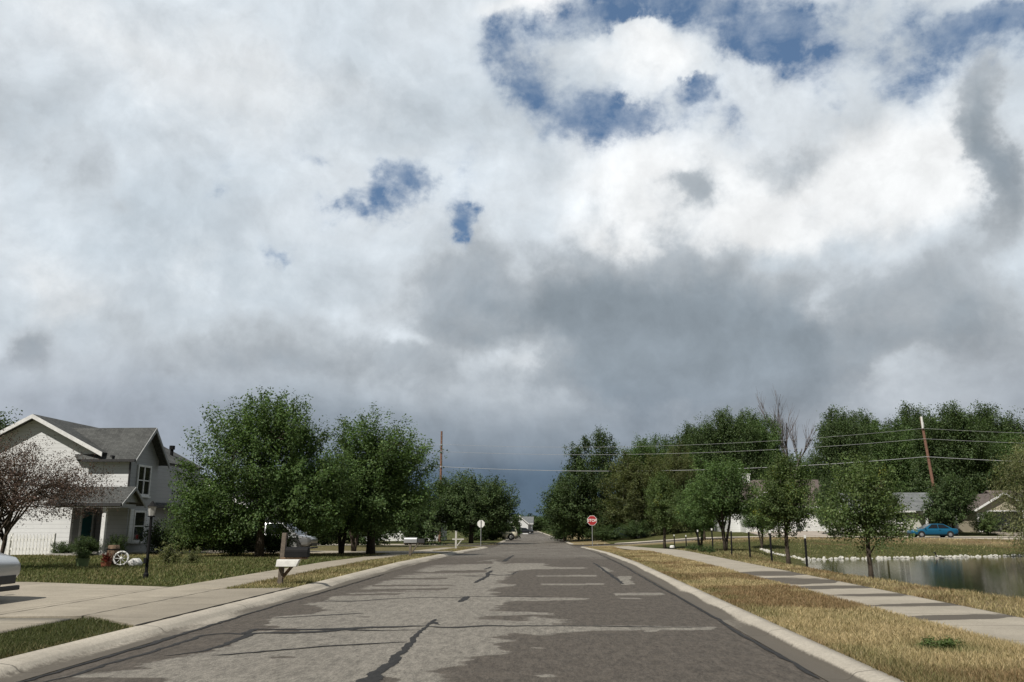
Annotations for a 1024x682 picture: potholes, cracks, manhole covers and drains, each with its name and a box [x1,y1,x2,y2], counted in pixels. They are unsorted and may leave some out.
crack [44,555,652,682]
